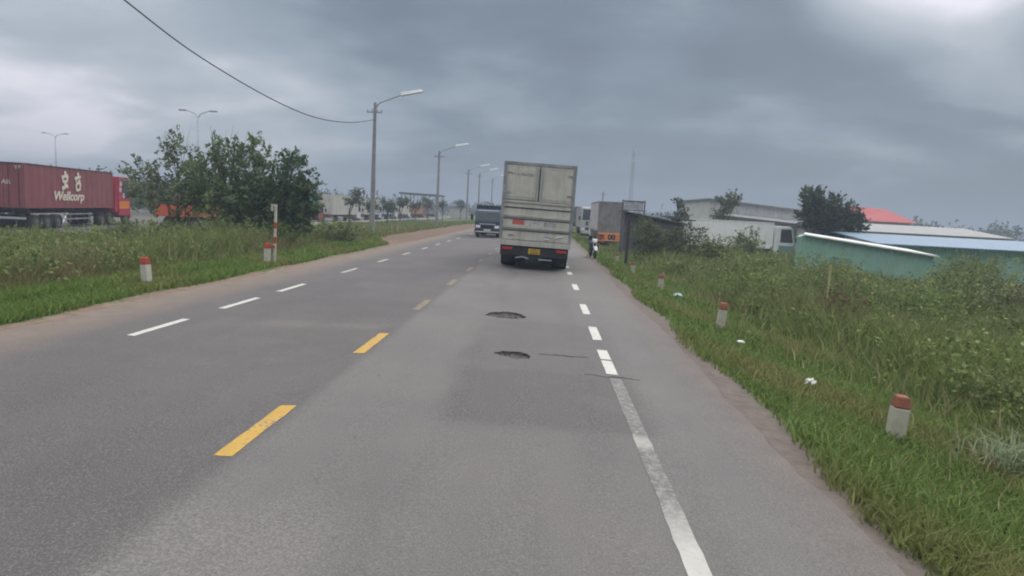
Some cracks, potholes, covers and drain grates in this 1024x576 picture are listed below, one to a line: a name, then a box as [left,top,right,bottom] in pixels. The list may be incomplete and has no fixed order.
crack [542,354,640,381]
pothole [494,351,530,359]
